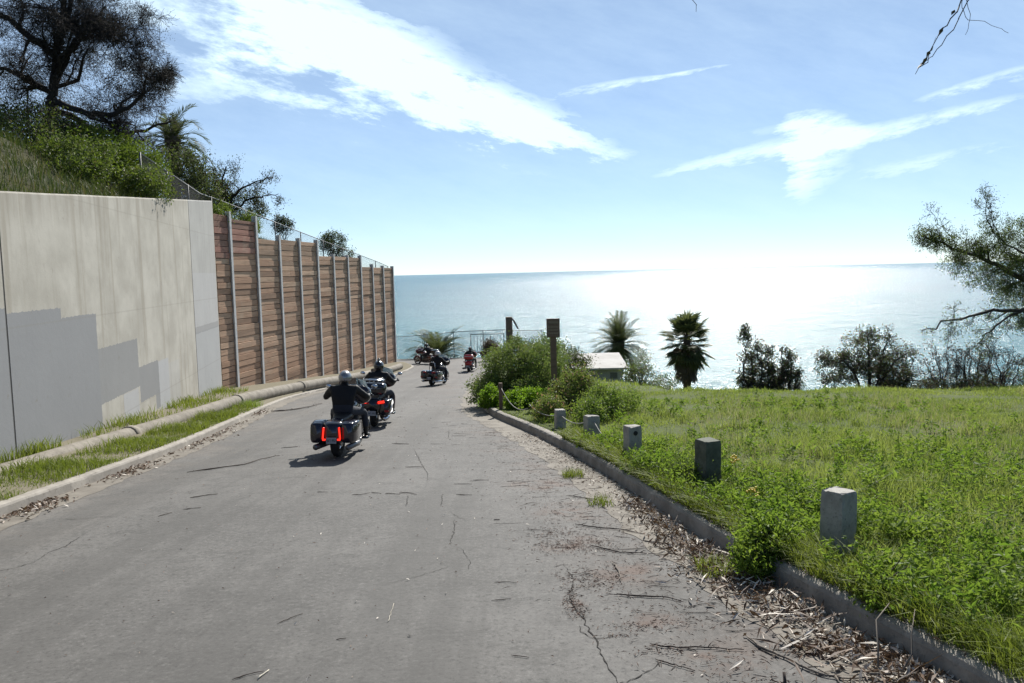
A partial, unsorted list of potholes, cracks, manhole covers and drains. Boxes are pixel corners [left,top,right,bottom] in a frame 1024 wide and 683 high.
crack [566,567,660,683]
crack [392,452,471,583]
